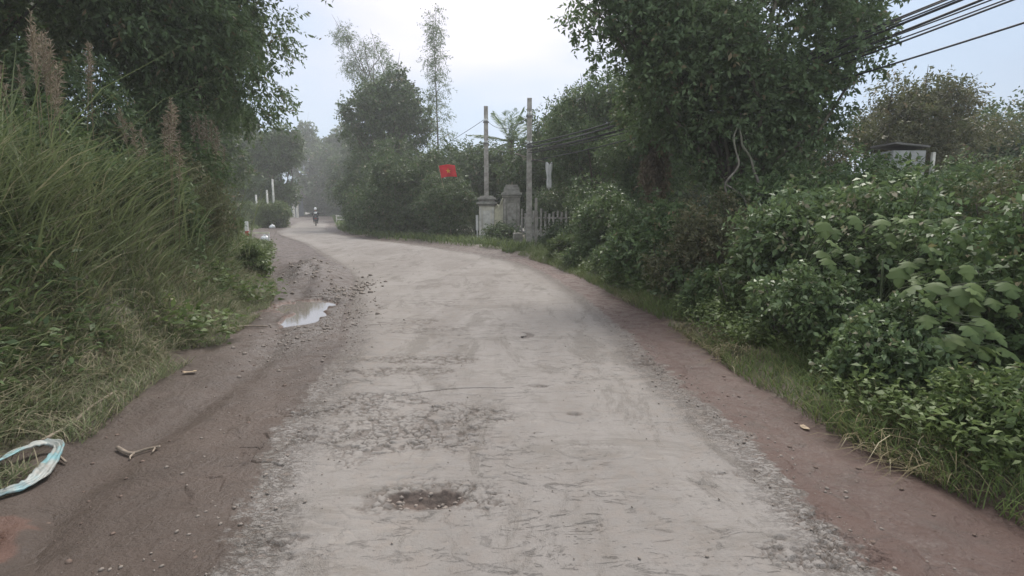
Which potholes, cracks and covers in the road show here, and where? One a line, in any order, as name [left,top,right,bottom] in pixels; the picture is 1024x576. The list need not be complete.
pothole [332,473,549,531]
pothole [252,295,349,331]
crack [168,295,535,576]
